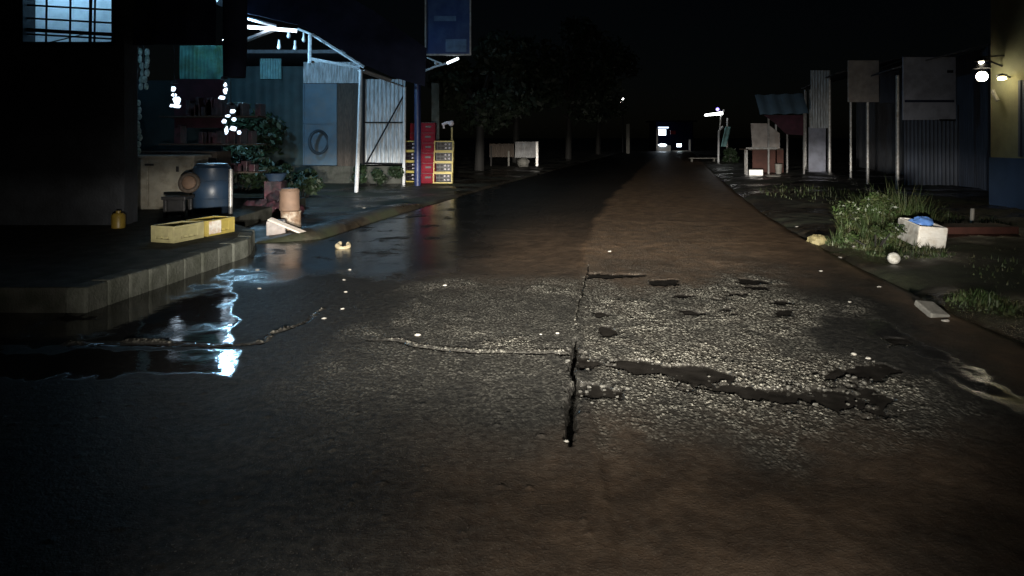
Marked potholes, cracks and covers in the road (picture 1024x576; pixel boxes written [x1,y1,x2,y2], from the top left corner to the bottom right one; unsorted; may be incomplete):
pothole [576,381,632,404]
pothole [793,360,905,388]
pothole [735,277,773,286]
pothole [700,378,915,420]
pothole [773,307,798,317]
crack [575,264,589,320]
pothole [648,278,681,286]
pothole [596,324,620,338]
crack [372,339,581,447]
crack [87,311,320,349]
pothole [559,347,760,395]
